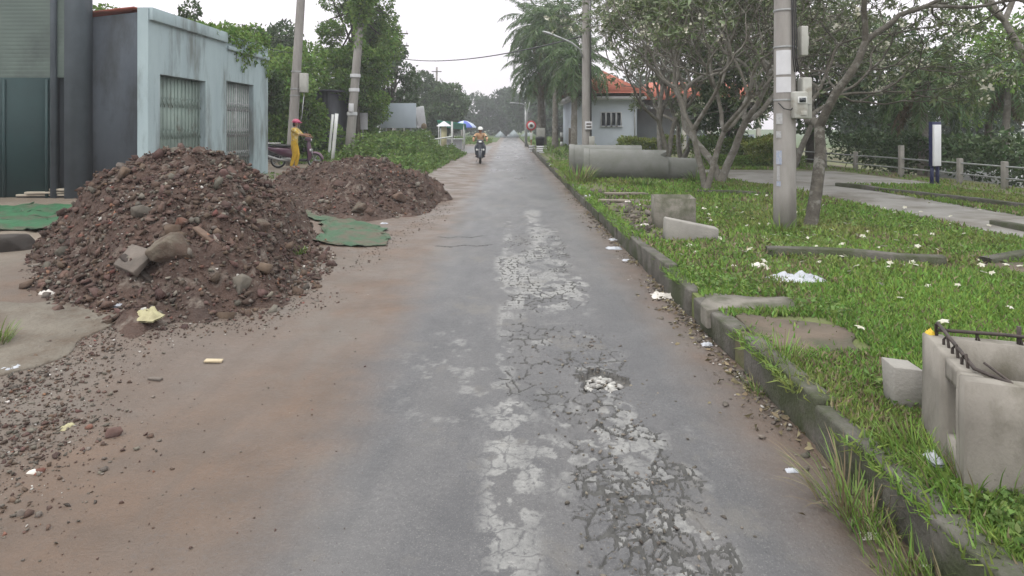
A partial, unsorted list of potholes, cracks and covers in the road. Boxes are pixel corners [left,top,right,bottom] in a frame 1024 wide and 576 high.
crack [499,322,743,576]
pothole [572,367,630,393]
crack [498,236,587,318]
